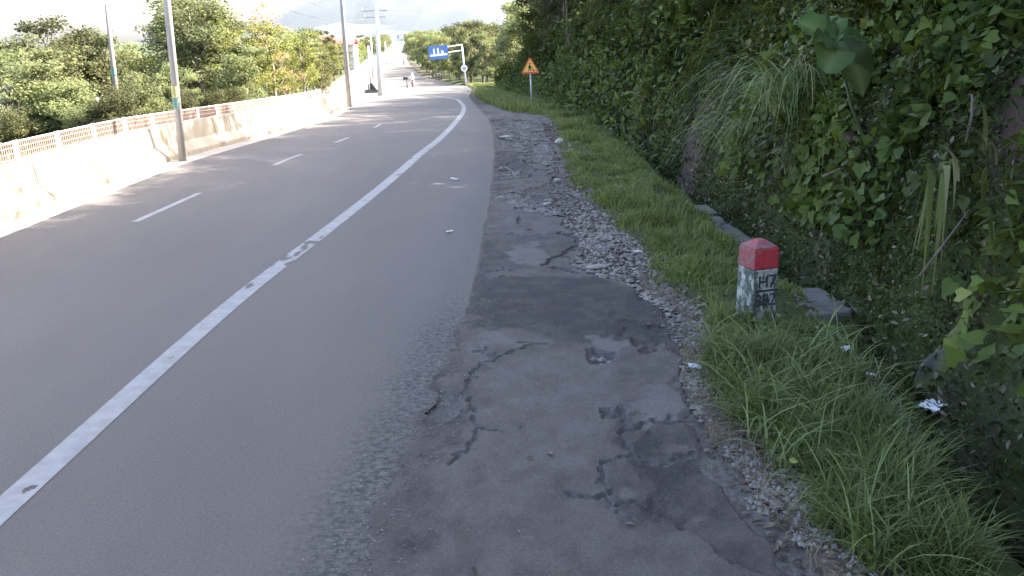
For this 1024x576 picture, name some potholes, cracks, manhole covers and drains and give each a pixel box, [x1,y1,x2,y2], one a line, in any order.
crack [496,231,584,274]
pothole [584,346,620,365]
crack [445,341,702,520]
